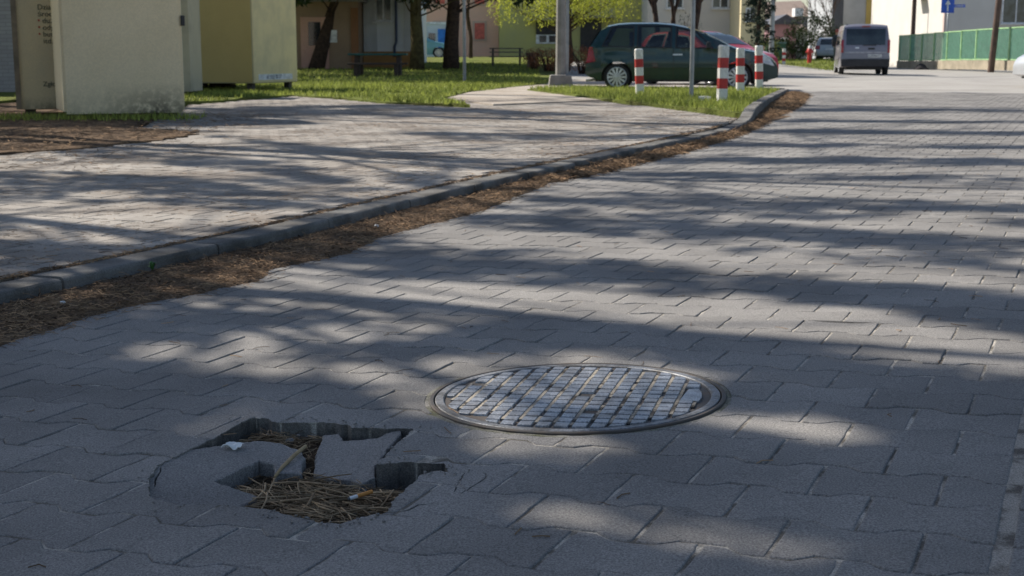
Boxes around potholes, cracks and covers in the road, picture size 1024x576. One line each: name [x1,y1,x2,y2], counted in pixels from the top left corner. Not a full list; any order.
manhole cover [424,363,731,438]
pothole [138,416,470,529]
